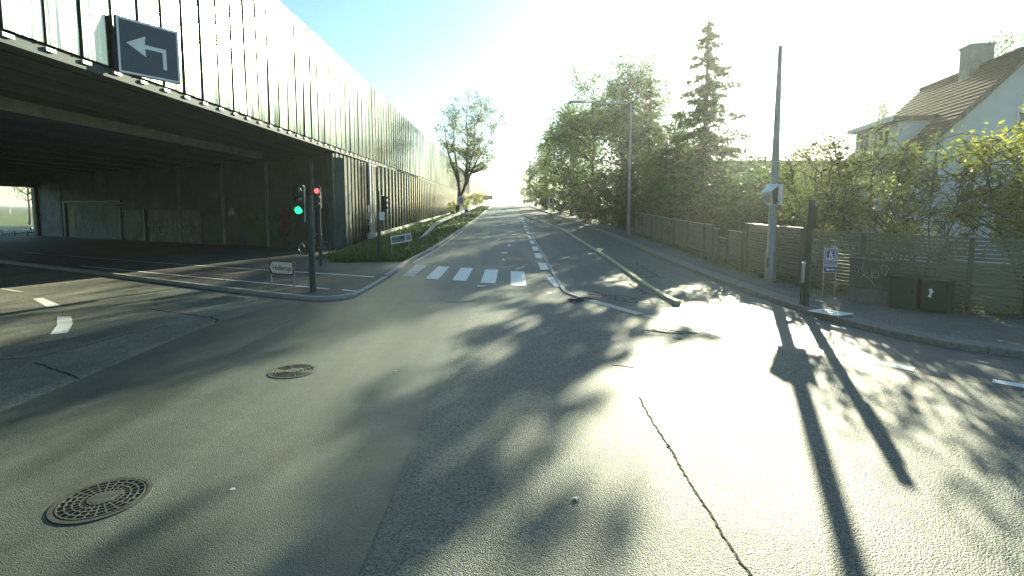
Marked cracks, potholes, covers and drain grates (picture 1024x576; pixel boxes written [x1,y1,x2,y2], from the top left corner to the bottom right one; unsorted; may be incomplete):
crack [583,262,700,340]
manhole cover [267,363,318,379]
crack [34,362,81,379]
manhole cover [46,476,153,525]
crack [639,397,753,576]
